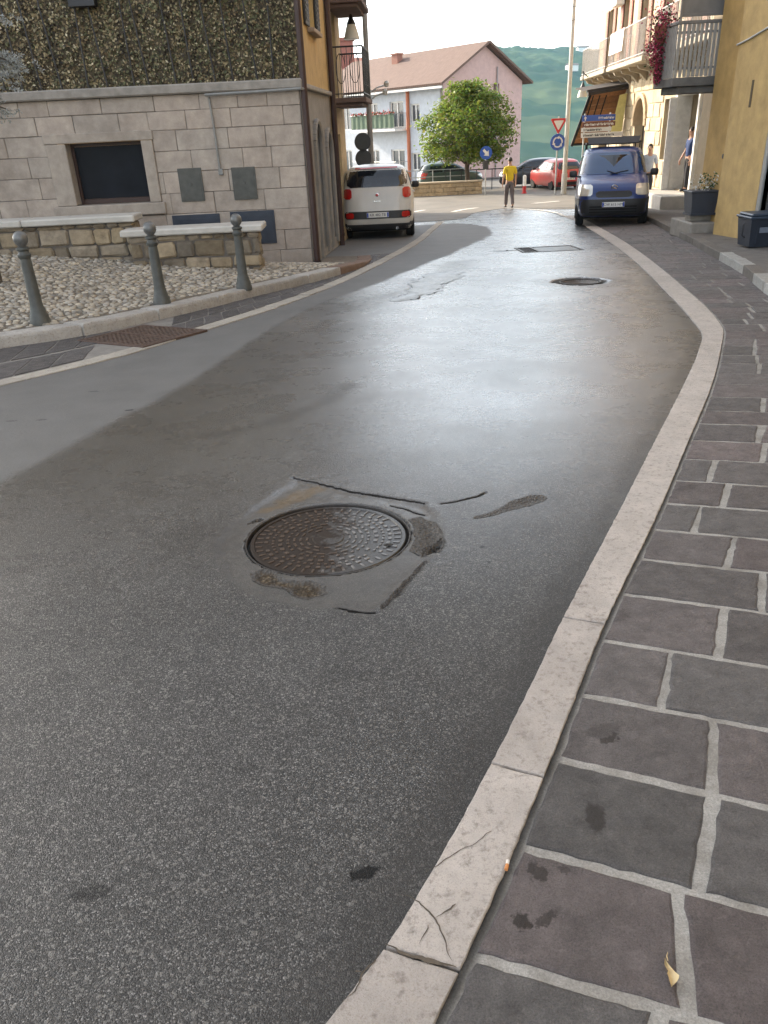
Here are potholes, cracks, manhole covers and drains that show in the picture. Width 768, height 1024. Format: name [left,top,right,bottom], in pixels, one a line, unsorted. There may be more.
drain grate [77,325,208,348]
crack [293,477,485,516]
crack [399,894,455,960]
manhole cover [514,245,585,253]
manhole cover [245,504,411,577]
